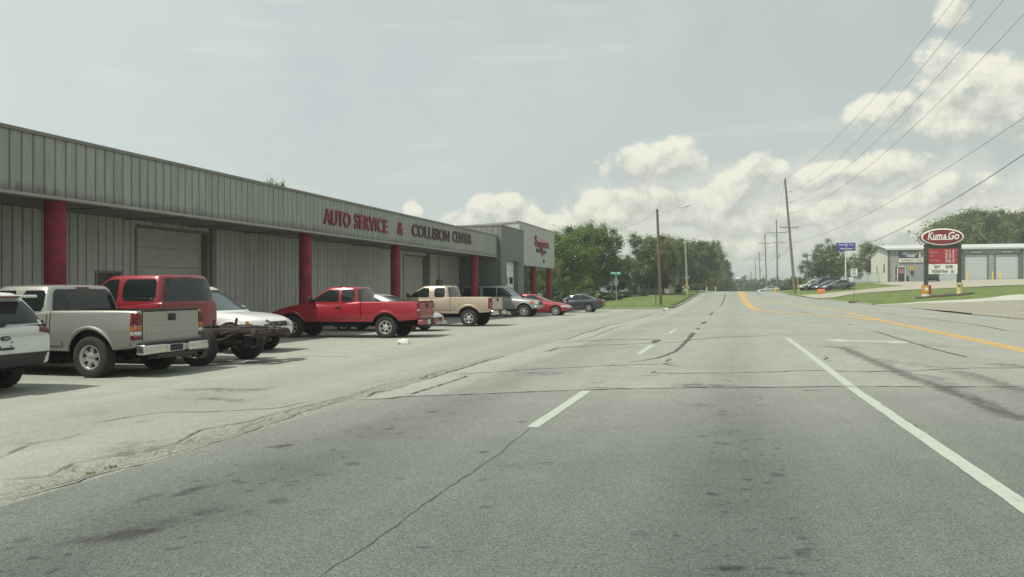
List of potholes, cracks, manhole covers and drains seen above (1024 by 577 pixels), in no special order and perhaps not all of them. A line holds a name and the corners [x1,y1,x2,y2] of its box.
crack [0,355,505,500]
crack [319,431,526,577]
